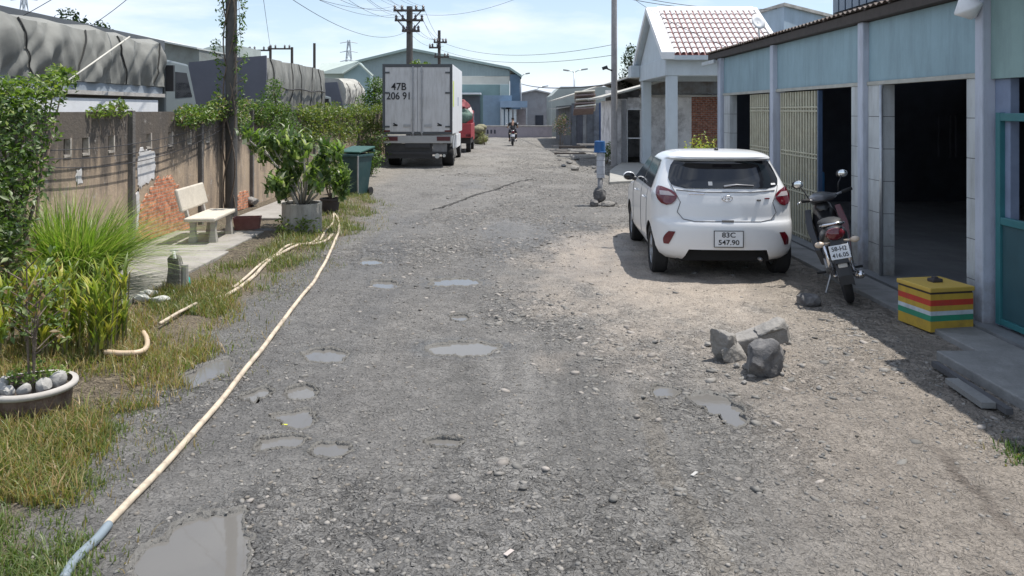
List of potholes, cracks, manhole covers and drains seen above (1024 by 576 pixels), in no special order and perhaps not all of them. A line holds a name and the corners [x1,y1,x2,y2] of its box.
pothole [424,339,503,358]
pothole [684,390,750,429]
pothole [238,385,276,404]
pothole [307,440,354,459]
pothole [358,257,385,266]
pothole [370,278,402,289]
pothole [424,434,466,448]
pothole [179,356,235,388]
pothole [448,312,471,322]
pothole [284,381,320,401]
pothole [299,346,350,363]
pothole [252,432,309,452]
